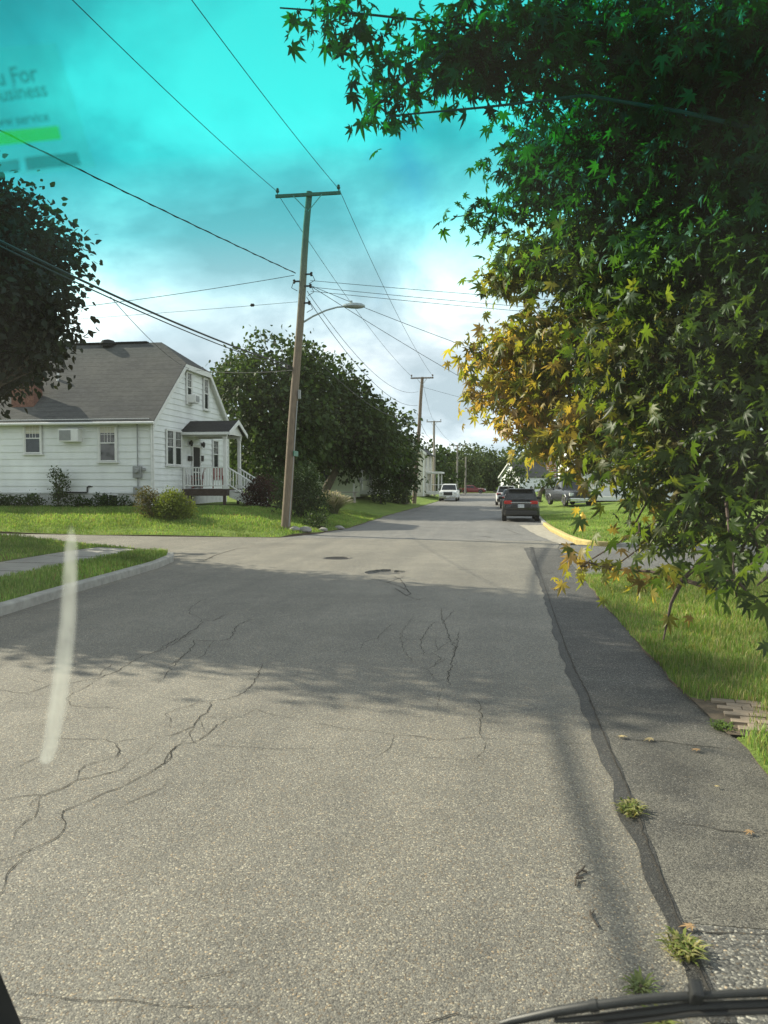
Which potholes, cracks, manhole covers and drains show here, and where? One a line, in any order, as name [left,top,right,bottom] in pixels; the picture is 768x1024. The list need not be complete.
crack [0,664,328,892]
crack [360,608,459,705]
crack [4,600,265,710]
